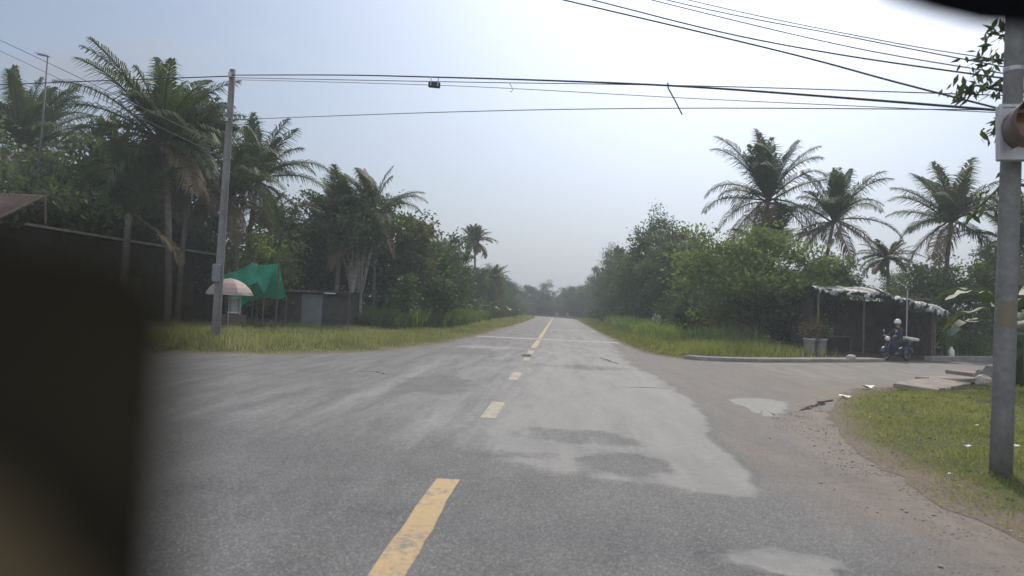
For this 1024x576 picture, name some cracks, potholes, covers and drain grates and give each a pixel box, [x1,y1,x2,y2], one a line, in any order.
crack [798,400,833,411]
